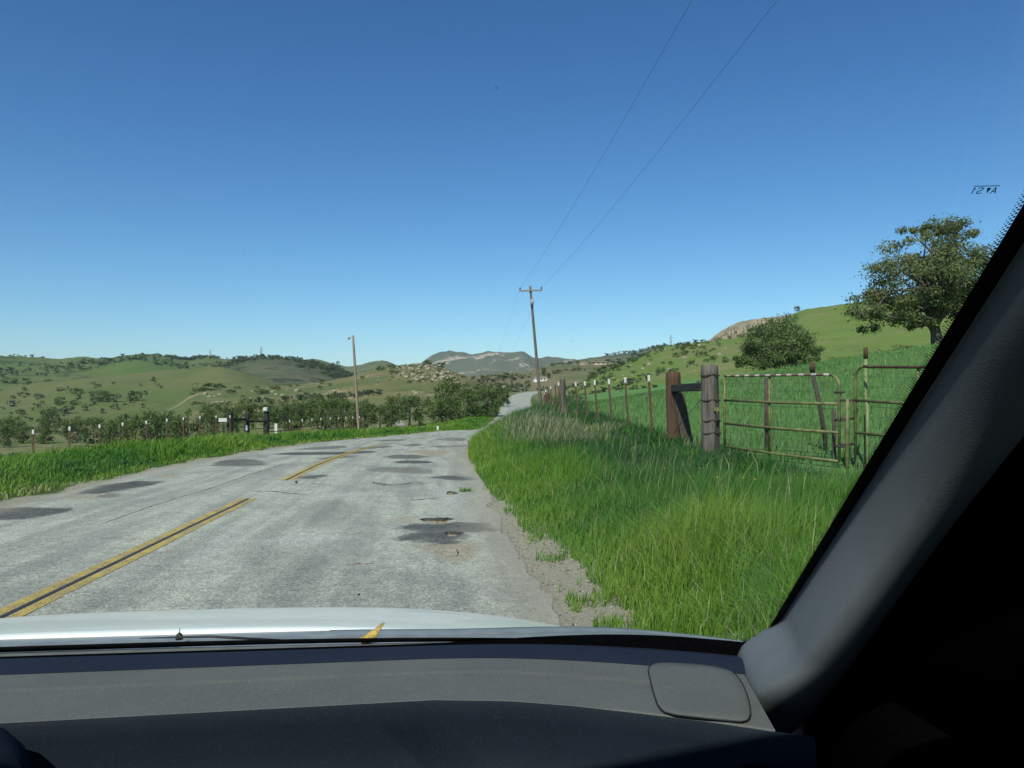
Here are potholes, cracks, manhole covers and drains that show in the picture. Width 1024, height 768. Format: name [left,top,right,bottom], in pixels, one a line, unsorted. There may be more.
crack [102,465,314,524]
